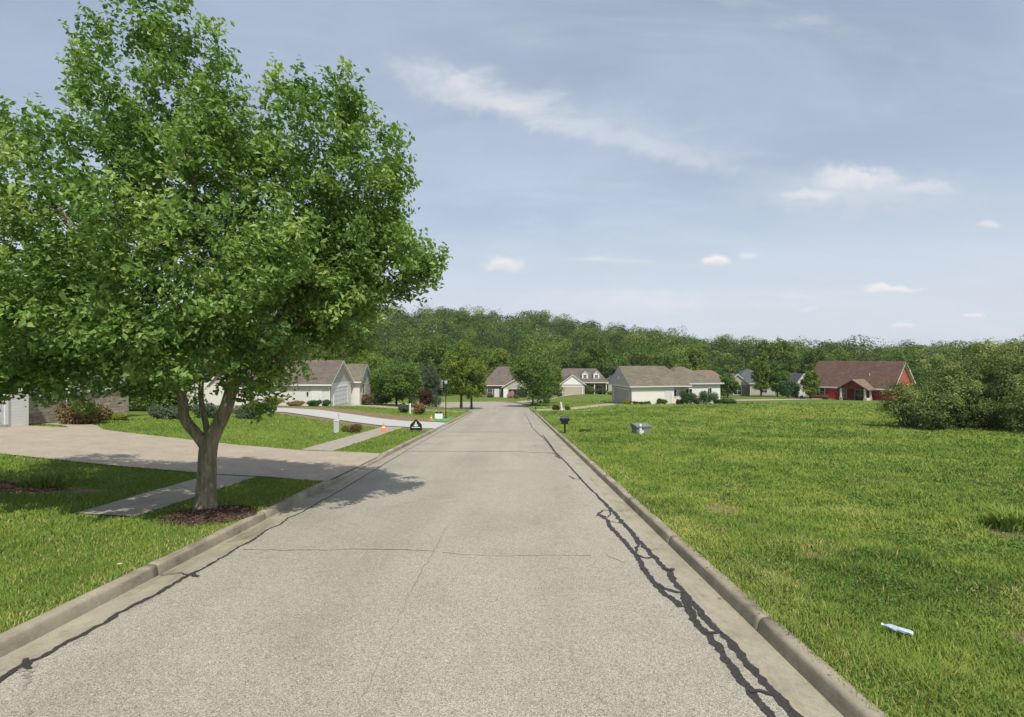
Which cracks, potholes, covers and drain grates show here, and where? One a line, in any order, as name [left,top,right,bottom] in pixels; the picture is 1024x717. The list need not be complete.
crack [243,525,563,704]
